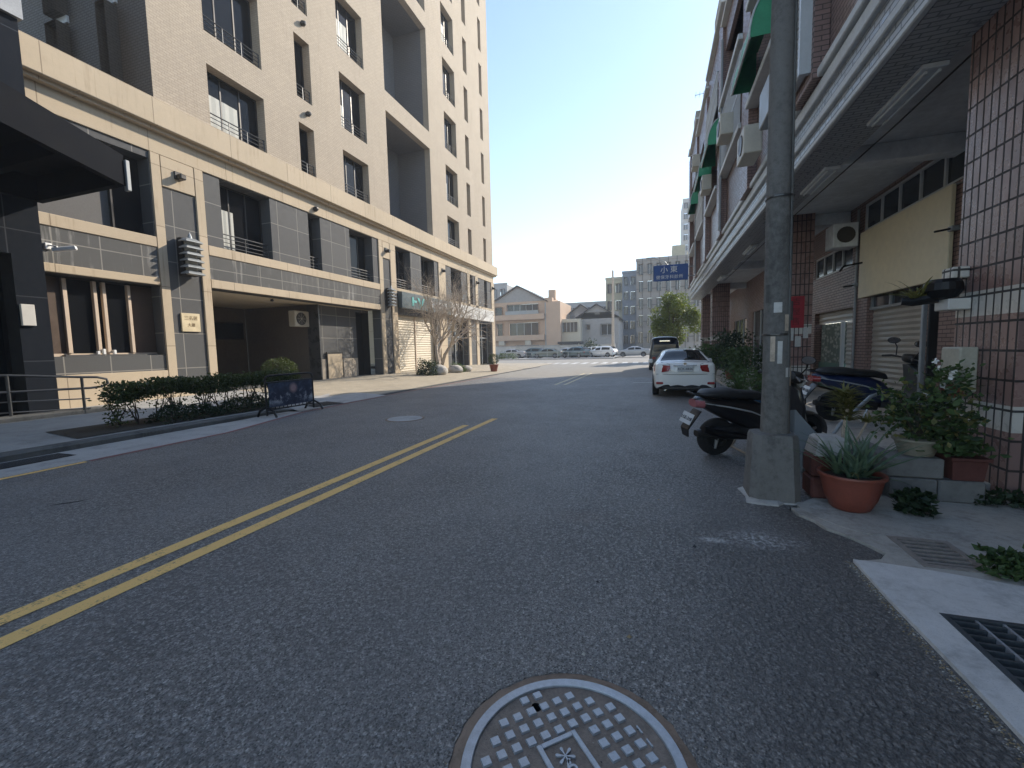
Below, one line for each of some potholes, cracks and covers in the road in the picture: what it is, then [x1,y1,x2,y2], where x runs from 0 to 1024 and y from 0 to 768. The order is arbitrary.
manhole cover [448,673,699,768]
drain grate [940,613,1024,692]
drain grate [886,535,986,573]
